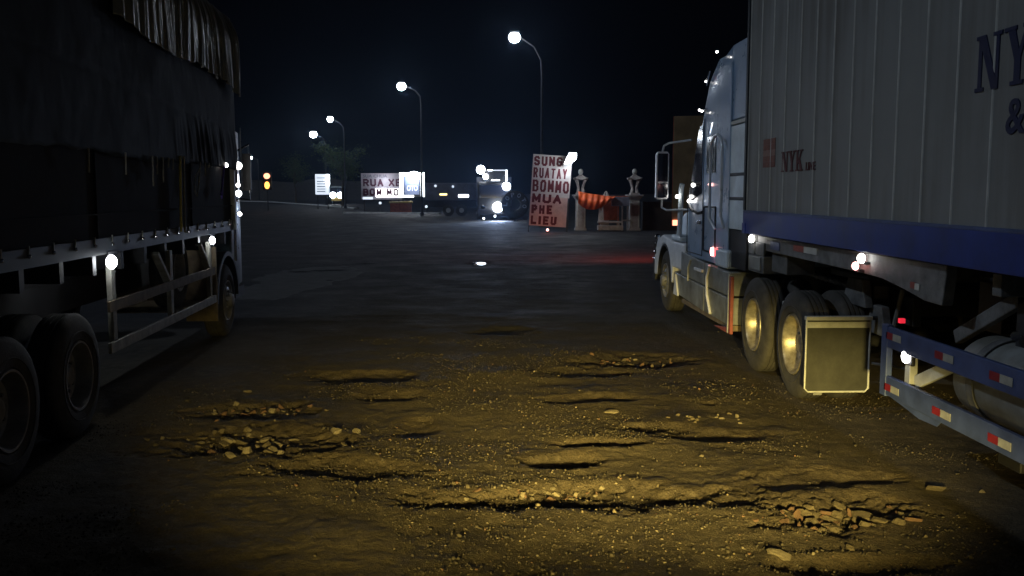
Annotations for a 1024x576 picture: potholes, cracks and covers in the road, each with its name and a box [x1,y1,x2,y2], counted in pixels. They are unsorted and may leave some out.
pothole [266,477,800,518]
pothole [455,324,547,336]
pothole [543,435,676,448]
pothole [735,486,958,547]
pothole [64,418,393,464]
pothole [554,350,721,370]
pothole [167,397,330,422]
pothole [268,368,440,386]
pothole [519,391,658,406]
pothole [644,426,787,444]
pothole [504,448,625,471]
